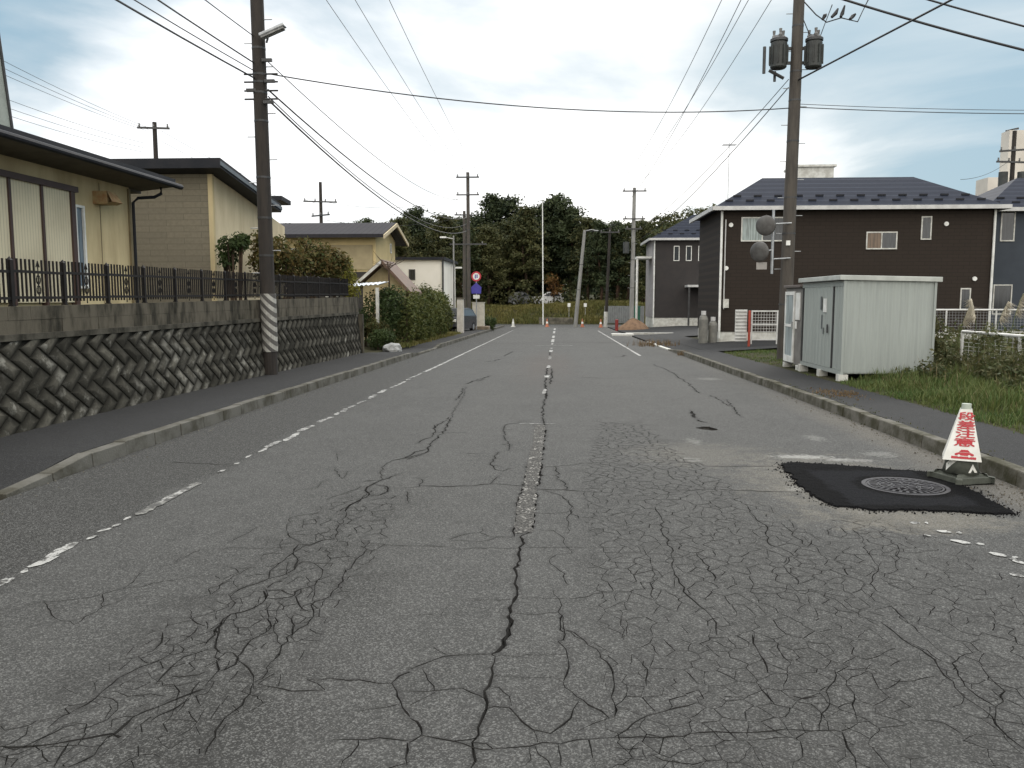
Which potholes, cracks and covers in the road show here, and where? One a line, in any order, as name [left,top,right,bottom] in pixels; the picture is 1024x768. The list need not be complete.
crack [0,487,395,767]
manhole cover [861,477,951,496]
crack [253,352,1024,768]
